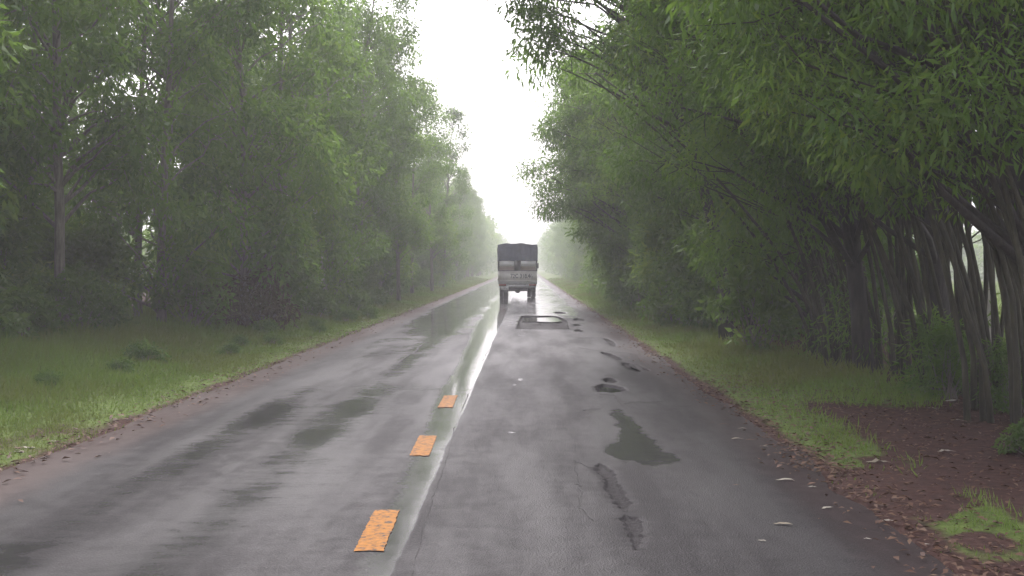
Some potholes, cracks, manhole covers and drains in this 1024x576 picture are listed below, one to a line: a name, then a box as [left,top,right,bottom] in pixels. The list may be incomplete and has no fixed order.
pothole [608,515,657,550]
crack [574,462,599,521]
pothole [588,383,631,393]
pothole [584,463,644,512]
pothole [617,362,645,372]
